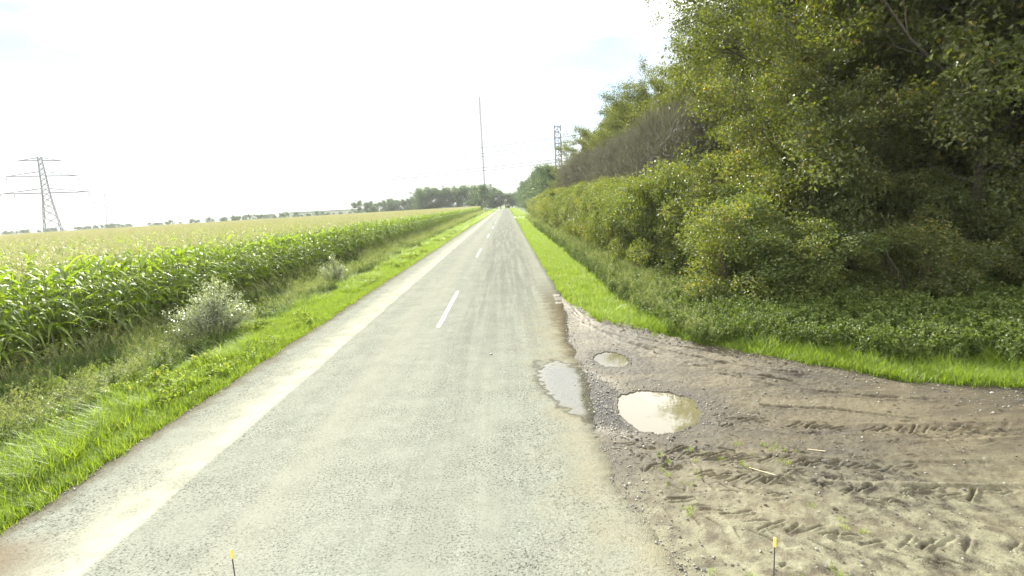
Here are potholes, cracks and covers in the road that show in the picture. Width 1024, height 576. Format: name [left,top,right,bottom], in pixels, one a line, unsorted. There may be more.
pothole [614,389,706,437]
pothole [591,351,630,368]
